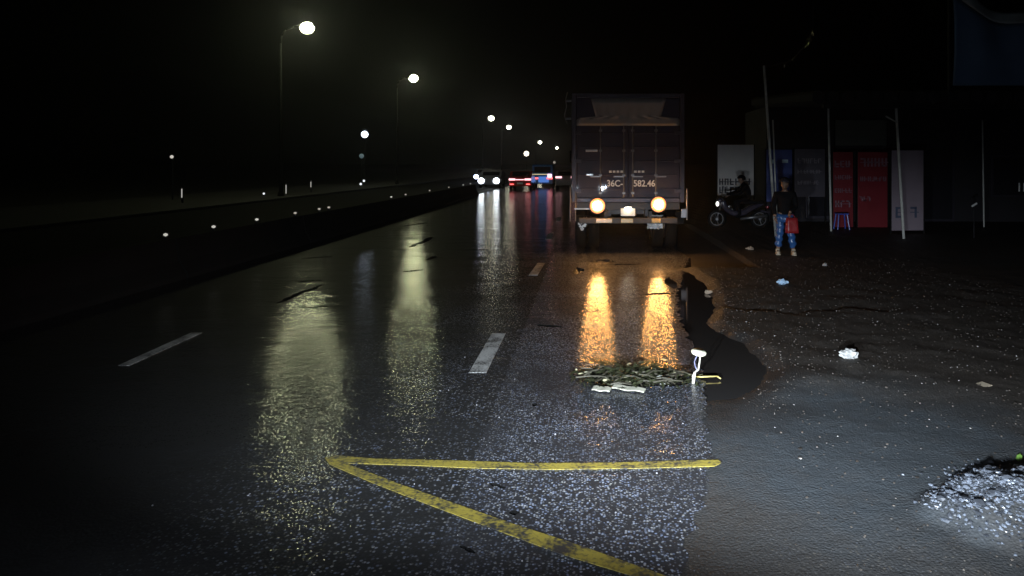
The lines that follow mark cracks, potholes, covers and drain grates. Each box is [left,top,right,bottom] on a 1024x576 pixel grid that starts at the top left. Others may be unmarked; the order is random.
crack [403,222,437,272]
crack [277,280,328,308]
